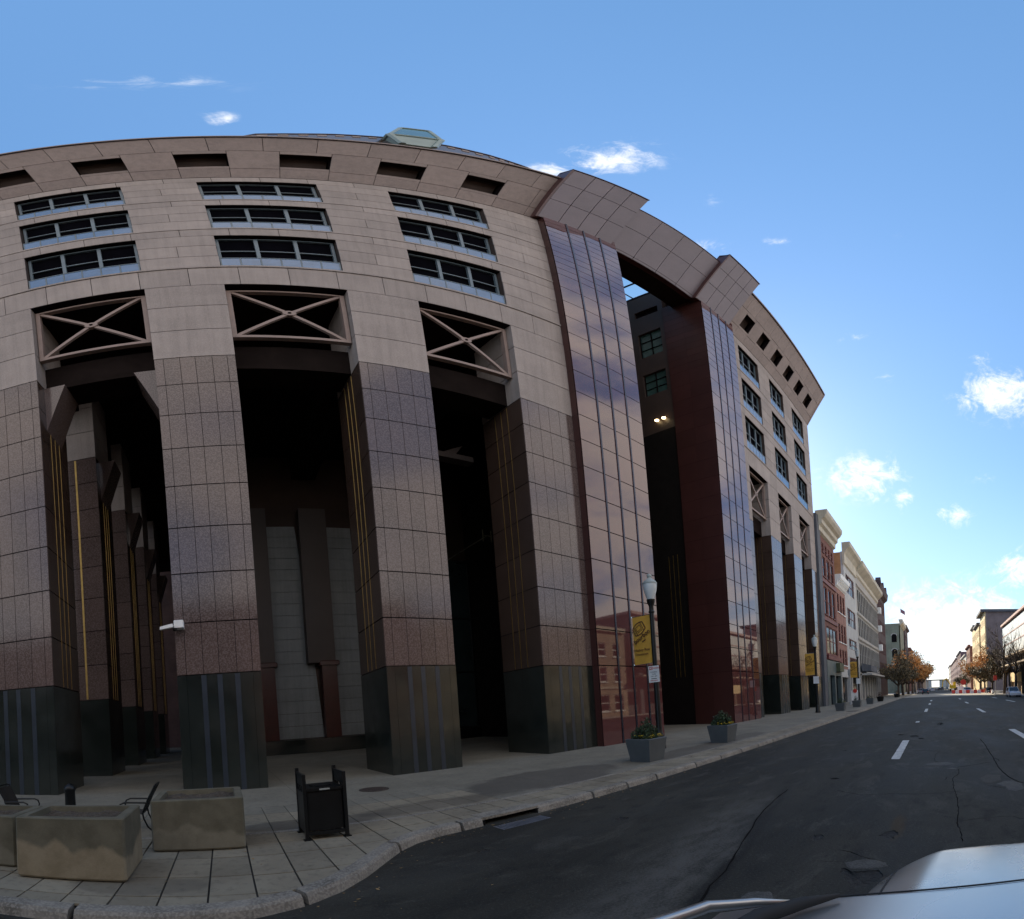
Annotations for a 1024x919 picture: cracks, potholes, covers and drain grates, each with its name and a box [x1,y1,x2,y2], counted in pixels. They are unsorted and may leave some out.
pothole [879,830,898,839]
drain grate [471,803,552,830]
crack [837,750,1024,841]
crack [698,789,788,903]
